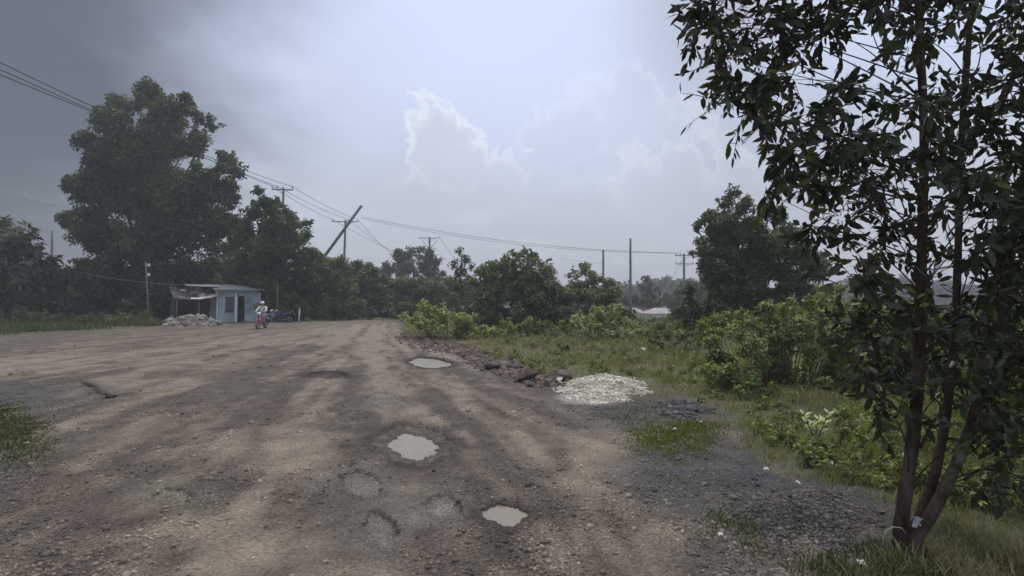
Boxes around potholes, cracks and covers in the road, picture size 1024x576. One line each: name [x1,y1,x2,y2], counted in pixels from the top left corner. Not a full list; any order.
pothole [409,490,475,524]
pothole [328,466,394,503]
pothole [360,421,464,470]
pothole [302,370,352,379]
pothole [348,505,413,556]
pothole [470,499,542,534]
pothole [403,355,458,369]
